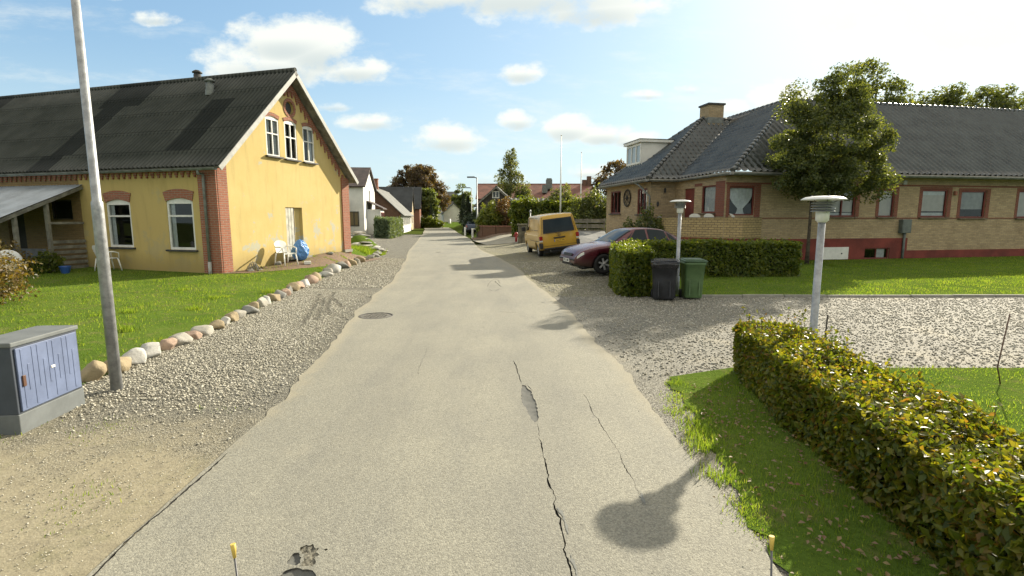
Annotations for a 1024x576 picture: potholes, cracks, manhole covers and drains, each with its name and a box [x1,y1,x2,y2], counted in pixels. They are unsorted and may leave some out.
pothole [281,544,328,576]
pothole [521,385,539,422]
crack [537,424,572,576]
